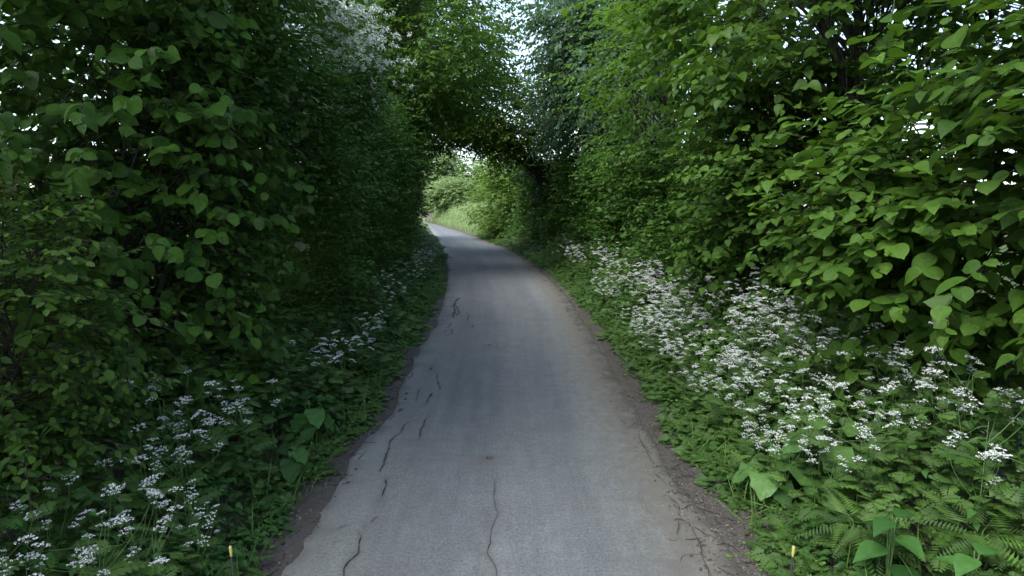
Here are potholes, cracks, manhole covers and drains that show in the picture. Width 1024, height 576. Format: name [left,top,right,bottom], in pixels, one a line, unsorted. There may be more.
crack [341,517,377,576]
crack [670,502,717,576]
crack [487,485,498,575]
crack [365,372,441,496]
crack [445,298,473,333]
